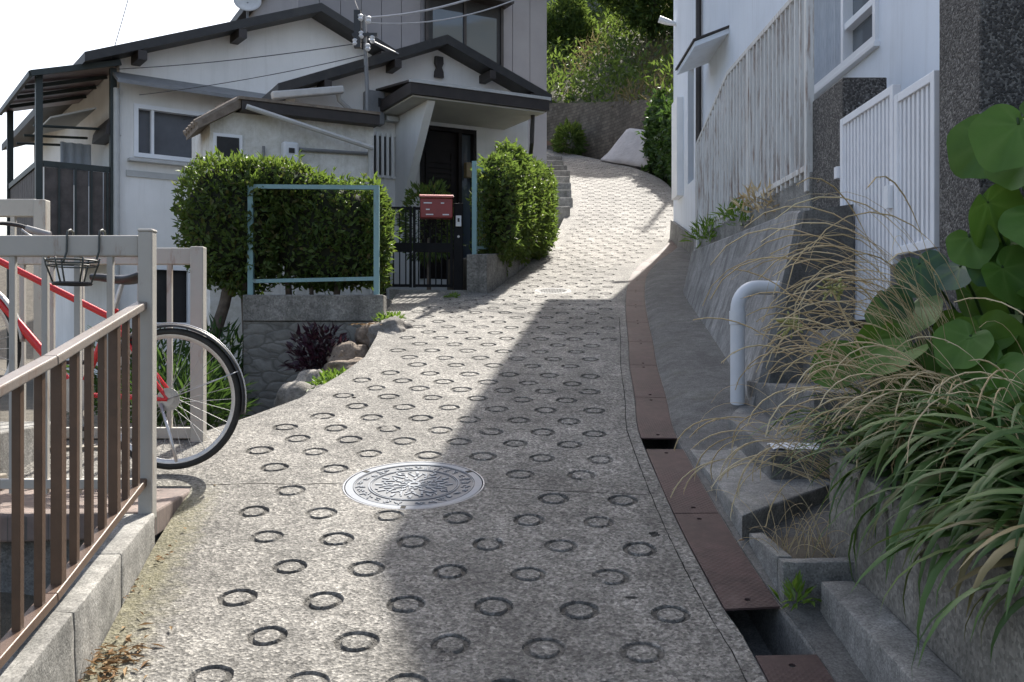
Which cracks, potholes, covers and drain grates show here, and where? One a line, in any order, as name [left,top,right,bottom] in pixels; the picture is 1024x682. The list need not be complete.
manhole cover [343,461,485,510]
